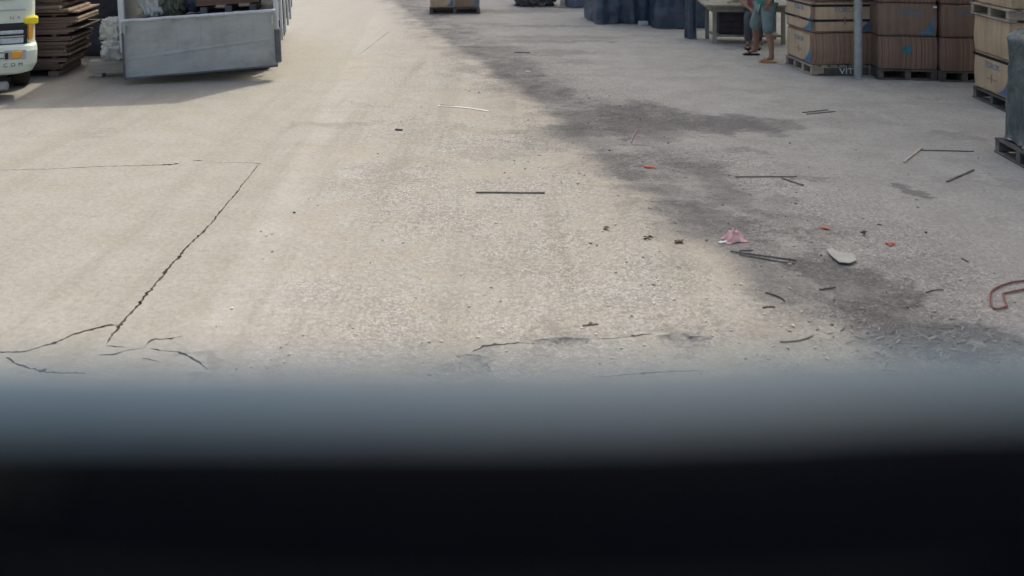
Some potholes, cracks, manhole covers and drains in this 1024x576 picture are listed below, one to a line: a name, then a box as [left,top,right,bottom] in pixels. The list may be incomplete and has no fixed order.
crack [471,333,652,353]
